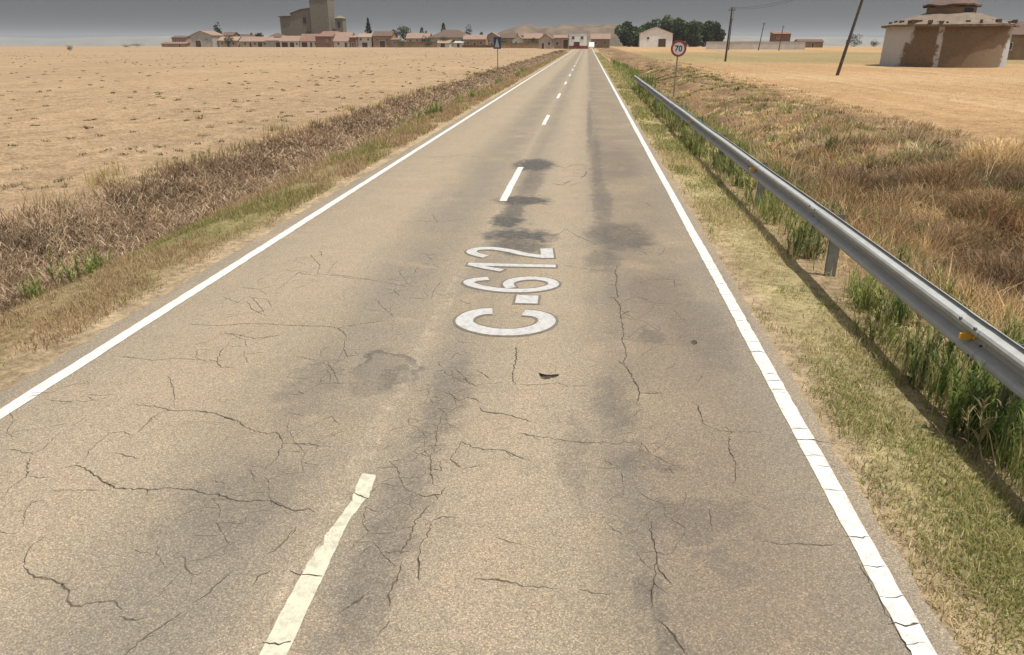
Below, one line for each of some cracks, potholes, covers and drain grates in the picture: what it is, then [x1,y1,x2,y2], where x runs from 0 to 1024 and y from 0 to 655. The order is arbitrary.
crack [338,350,713,653]
crack [0,251,470,655]
